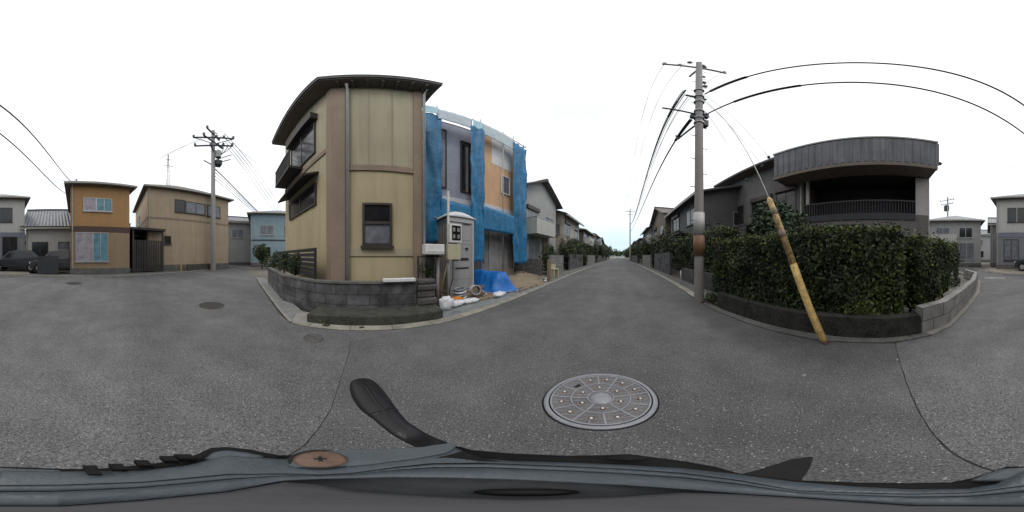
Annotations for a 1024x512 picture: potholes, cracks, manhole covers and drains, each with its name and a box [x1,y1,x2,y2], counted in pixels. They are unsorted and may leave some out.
manhole cover [303,334,324,343]
manhole cover [542,373,660,431]
